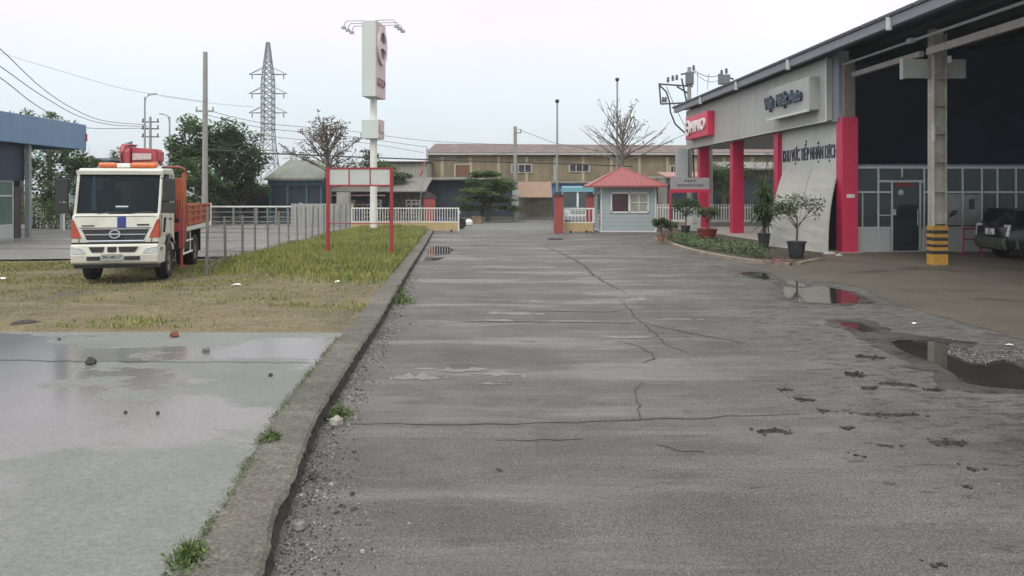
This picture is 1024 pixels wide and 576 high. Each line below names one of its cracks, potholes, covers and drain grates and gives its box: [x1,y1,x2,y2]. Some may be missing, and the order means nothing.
pothole [891,339,1024,387]
crack [378,383,794,441]
crack [465,302,738,363]
